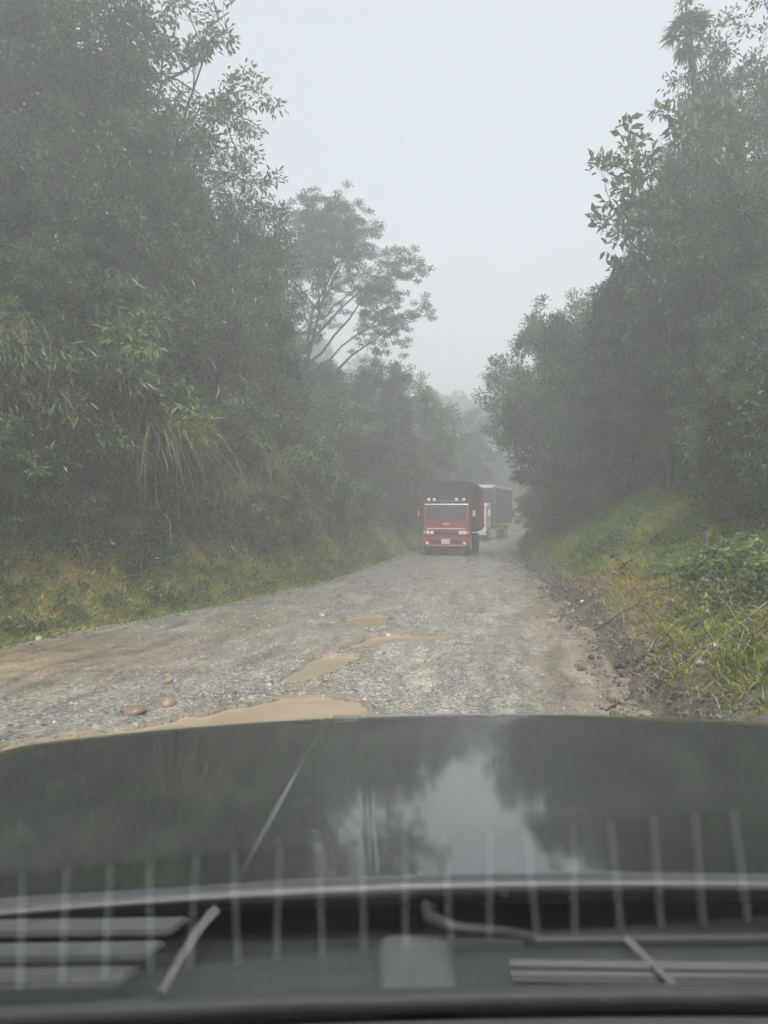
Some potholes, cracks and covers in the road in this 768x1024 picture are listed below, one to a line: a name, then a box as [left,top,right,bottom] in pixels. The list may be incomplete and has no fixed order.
pothole [337,613,397,628]
pothole [275,652,365,683]
pothole [0,693,374,751]
pothole [341,632,463,649]
